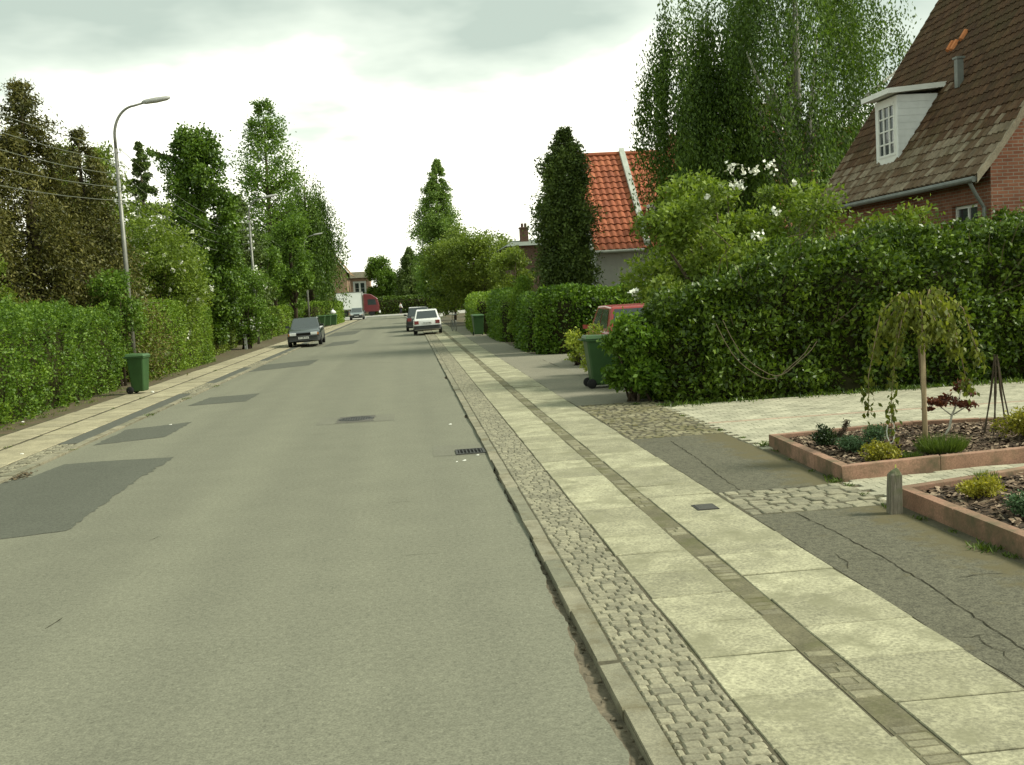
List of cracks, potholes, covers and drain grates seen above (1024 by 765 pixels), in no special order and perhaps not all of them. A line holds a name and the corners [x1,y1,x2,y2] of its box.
crack [797,513,1024,661]
utility cover [691,503,720,511]
